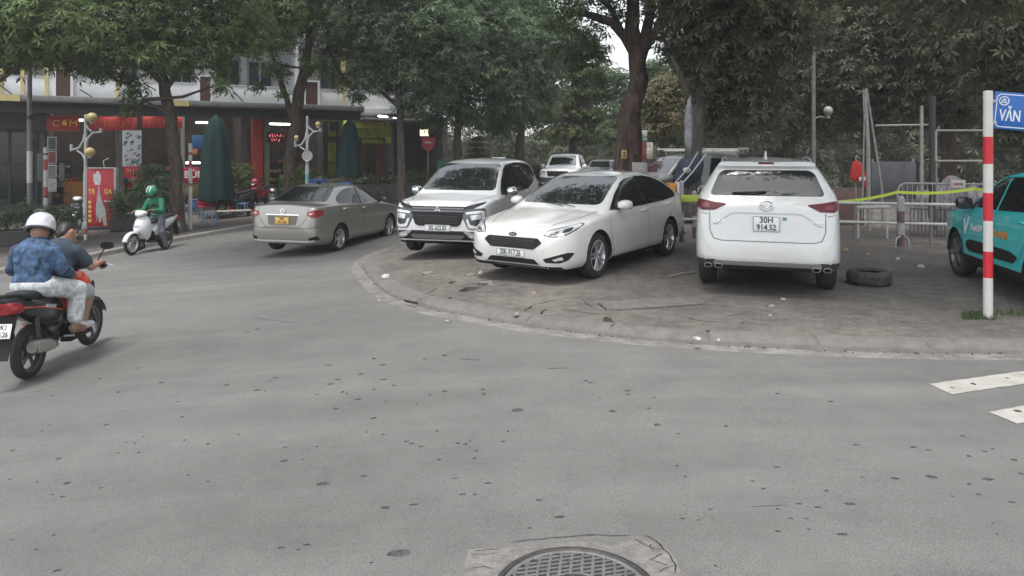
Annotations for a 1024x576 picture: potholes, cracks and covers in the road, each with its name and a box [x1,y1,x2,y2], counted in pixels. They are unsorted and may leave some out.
crack [524,300,752,324]
manhole cover [498,546,650,576]
